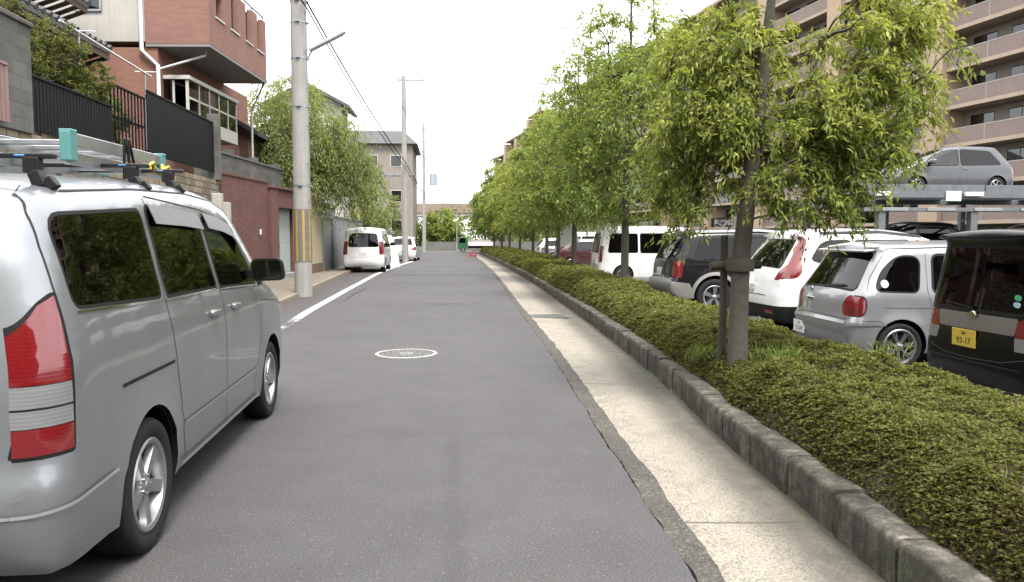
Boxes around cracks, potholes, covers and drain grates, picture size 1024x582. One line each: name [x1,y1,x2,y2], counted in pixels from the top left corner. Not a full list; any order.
manhole cover [375,349,437,358]
